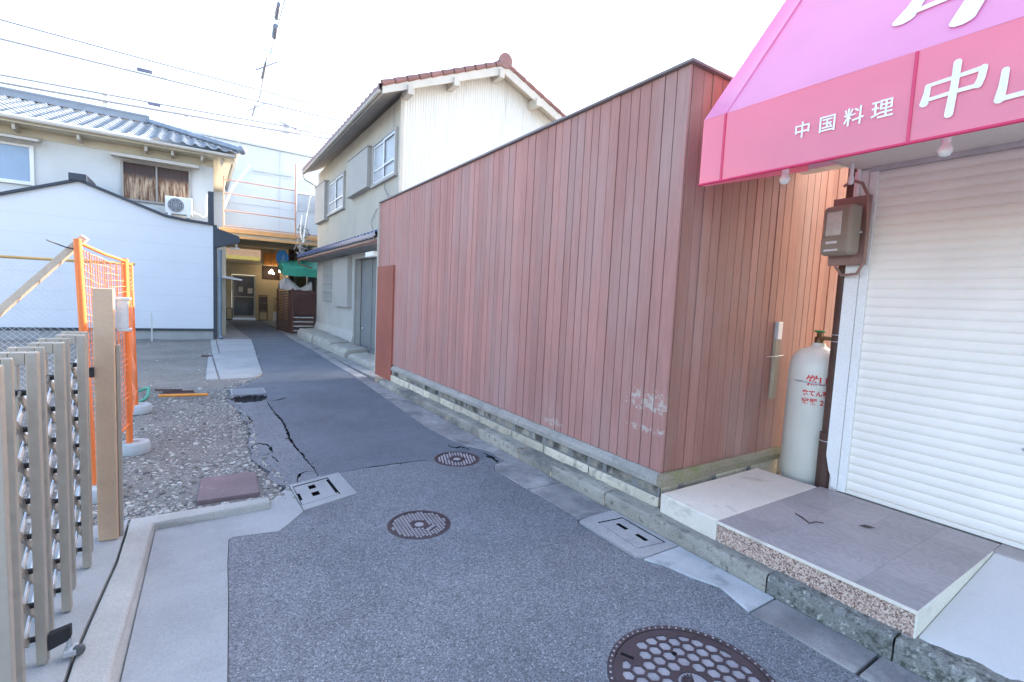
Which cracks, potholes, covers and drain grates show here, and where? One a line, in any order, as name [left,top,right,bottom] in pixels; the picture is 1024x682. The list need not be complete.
pothole [230,395,267,403]
manhole cover [607,626,776,682]
manhole cover [387,510,451,540]
crack [449,446,498,462]
crack [248,397,318,482]
manhole cover [434,451,479,467]
